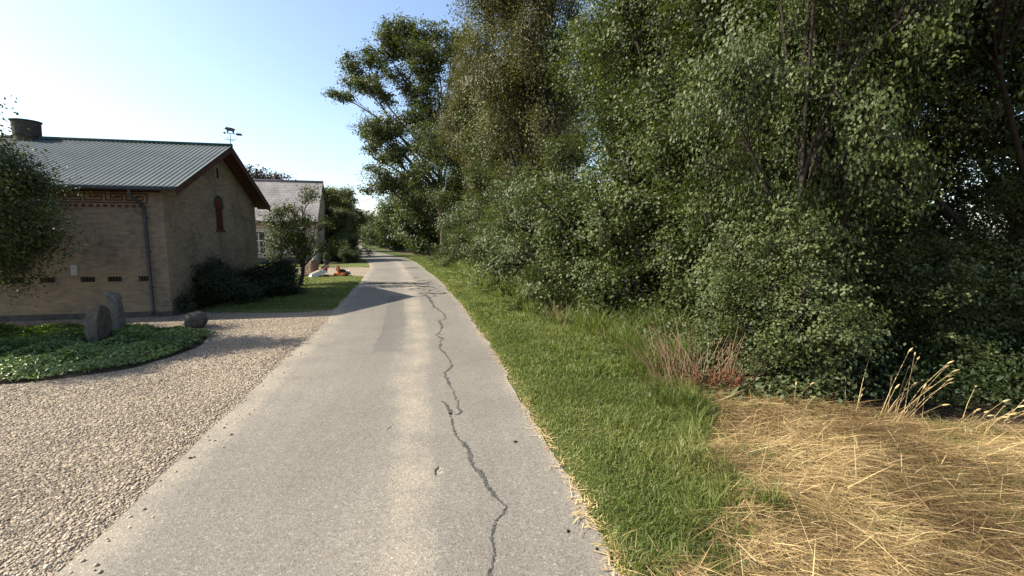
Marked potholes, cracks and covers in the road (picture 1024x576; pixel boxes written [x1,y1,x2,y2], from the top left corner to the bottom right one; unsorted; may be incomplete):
crack [368,277,507,576]
